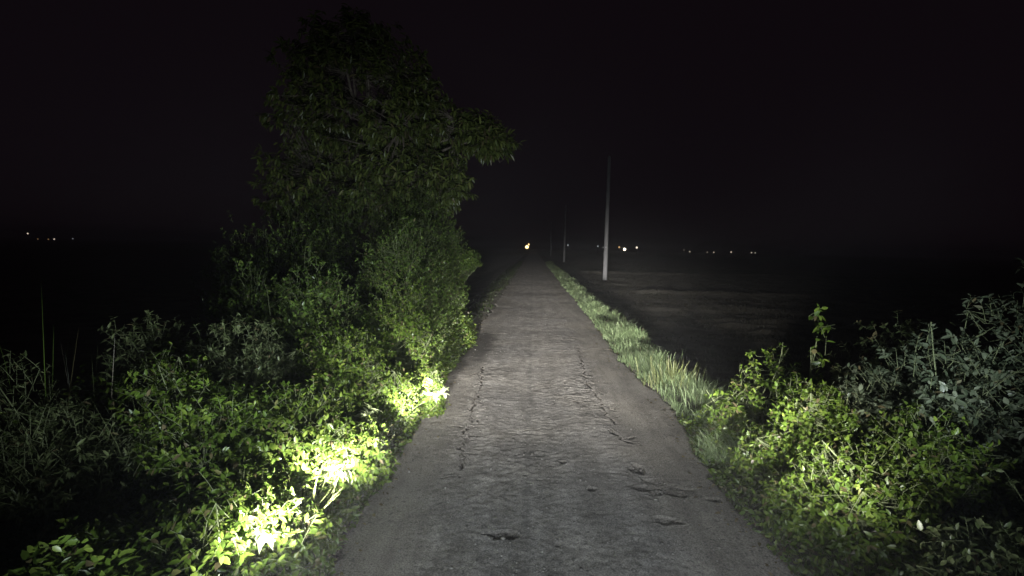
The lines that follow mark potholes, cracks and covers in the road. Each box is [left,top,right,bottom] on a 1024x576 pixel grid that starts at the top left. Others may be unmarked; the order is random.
pothole [647,514,689,528]
crack [442,366,491,479]
pothole [626,475,700,500]
pothole [626,461,648,477]
pothole [475,528,524,542]
crack [488,333,640,445]
